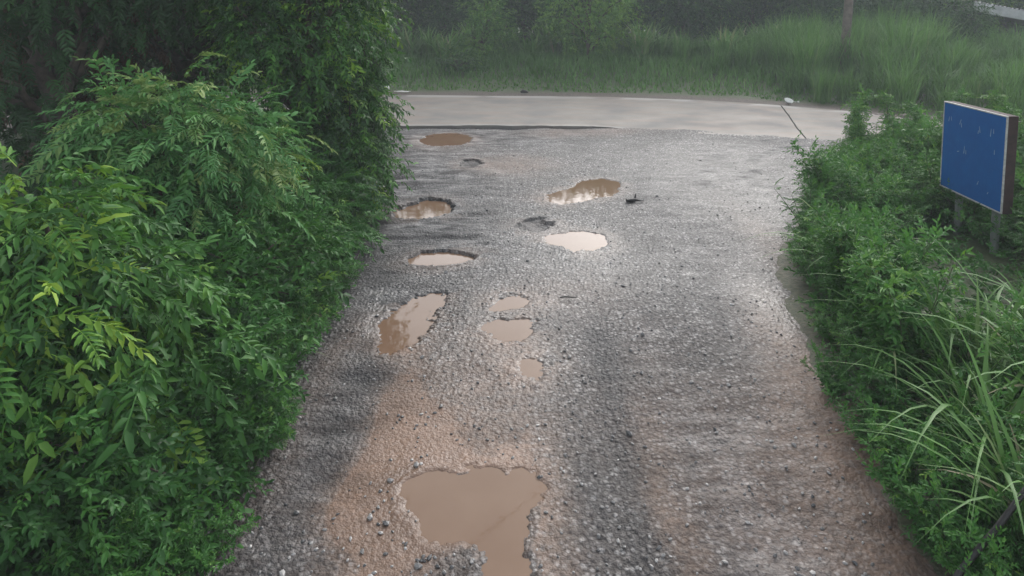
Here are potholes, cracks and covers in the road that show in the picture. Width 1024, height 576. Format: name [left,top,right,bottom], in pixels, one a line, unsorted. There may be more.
pothole [539,177,626,206]
pothole [508,214,565,235]
pothole [479,291,542,315]
pothole [385,455,558,576]
pothole [466,311,552,347]
pothole [415,133,476,147]
pothole [537,228,615,254]
pothole [454,158,487,169]
pothole [393,246,483,270]
pothole [368,289,454,359]
pothole [385,196,461,222]
